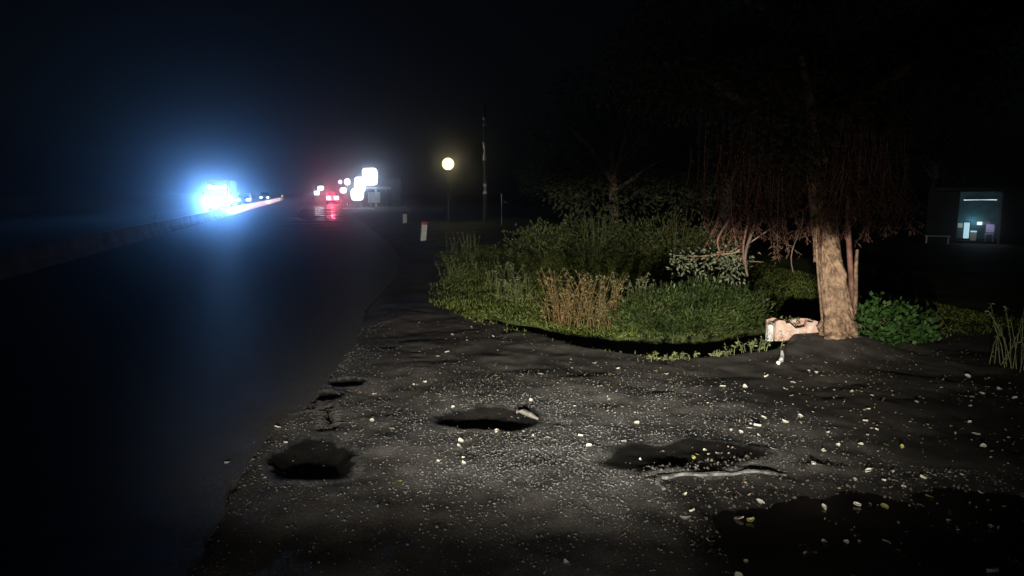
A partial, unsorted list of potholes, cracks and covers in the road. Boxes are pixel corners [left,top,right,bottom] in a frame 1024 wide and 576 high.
pothole [324,375,374,389]
crack [283,400,346,431]
pothole [309,388,353,406]
pothole [585,435,787,480]
pothole [424,401,553,435]
pothole [252,433,368,487]
